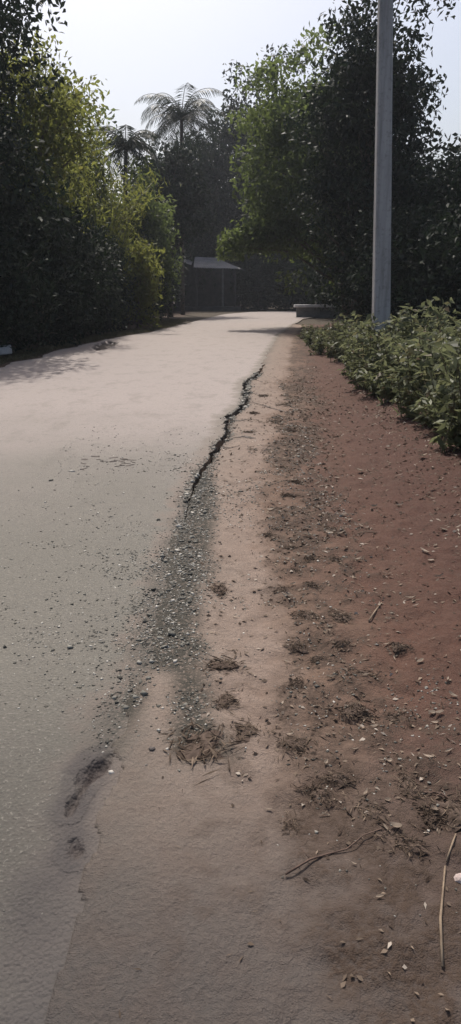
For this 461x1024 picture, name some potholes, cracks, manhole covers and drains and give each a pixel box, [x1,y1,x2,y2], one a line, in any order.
pothole [53,747,122,826]
crack [191,369,284,492]
